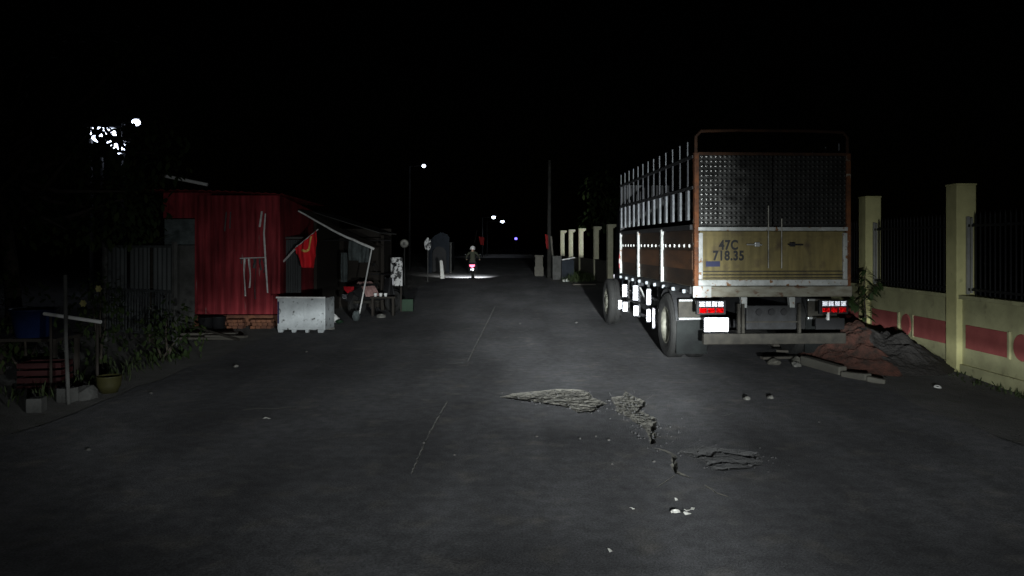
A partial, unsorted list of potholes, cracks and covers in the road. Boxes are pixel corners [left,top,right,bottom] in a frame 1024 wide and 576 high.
crack [654,448,728,497]
pothole [501,389,608,413]
pothole [678,446,763,471]
pothole [611,391,657,444]
